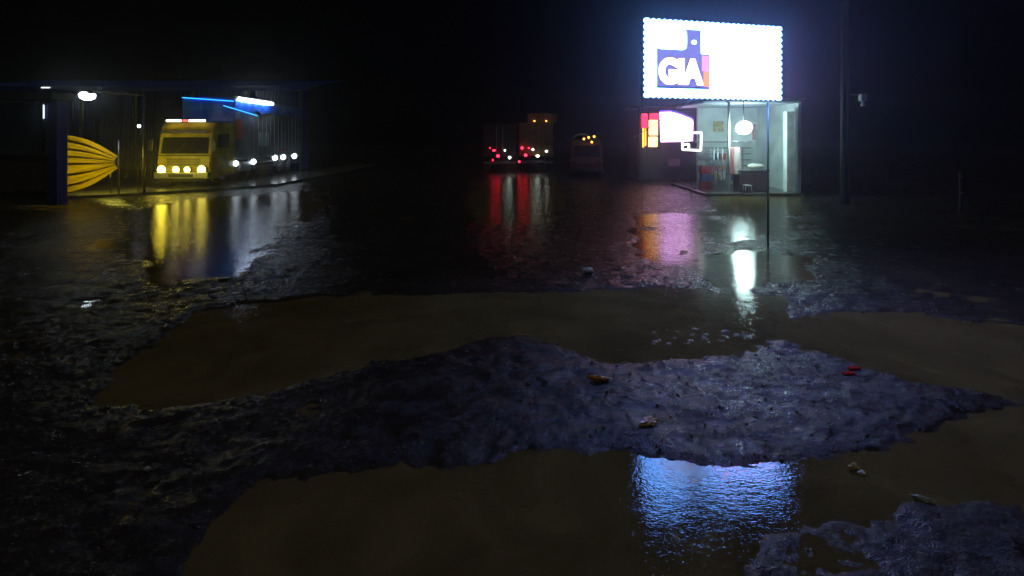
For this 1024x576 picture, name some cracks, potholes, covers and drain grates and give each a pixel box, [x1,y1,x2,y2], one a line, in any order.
pothole [803,314,1024,393]
pothole [203,410,1024,576]
pothole [90,288,785,410]
